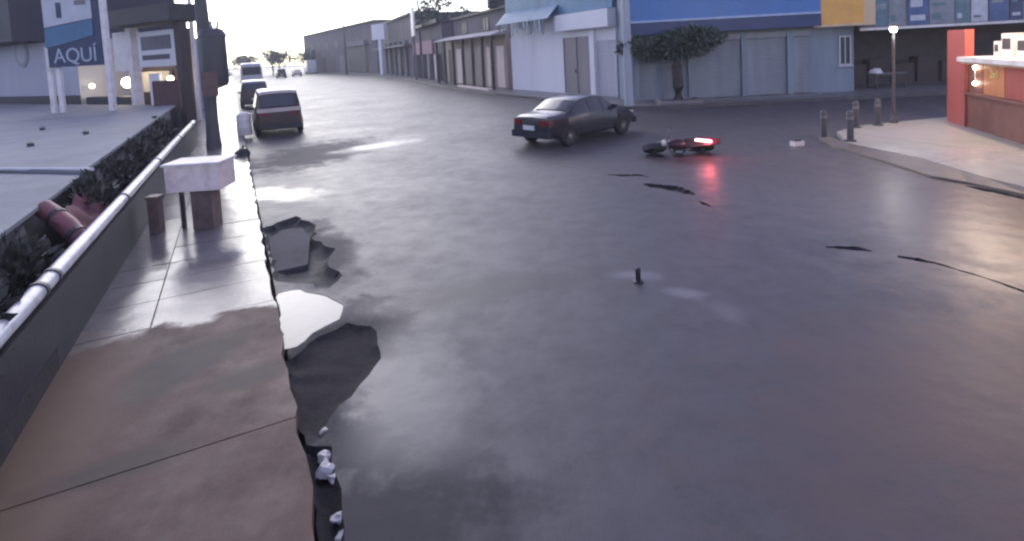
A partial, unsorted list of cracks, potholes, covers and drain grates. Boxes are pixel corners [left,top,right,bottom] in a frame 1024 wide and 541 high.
pothole [303,444,345,541]
crack [614,174,713,208]
pothole [285,323,381,439]
pothole [276,289,344,351]
crack [897,256,1024,292]
pothole [261,216,342,288]
